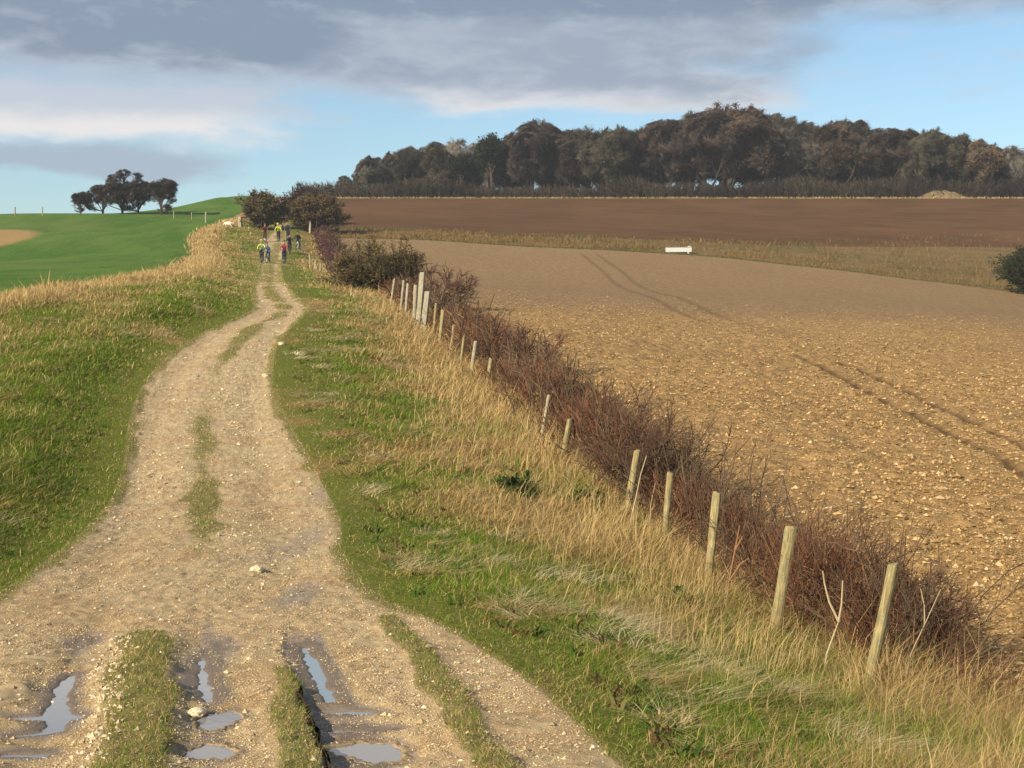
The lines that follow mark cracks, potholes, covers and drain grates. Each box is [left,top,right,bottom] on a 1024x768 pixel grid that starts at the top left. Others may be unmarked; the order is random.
pothole [323,740,415,765]
pothole [177,742,246,761]
pothole [189,709,249,734]
